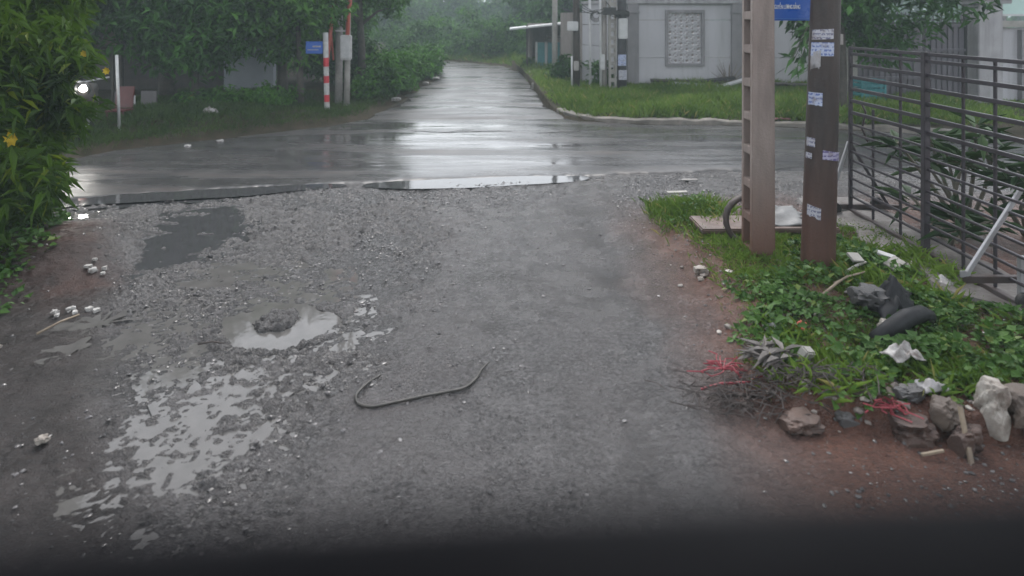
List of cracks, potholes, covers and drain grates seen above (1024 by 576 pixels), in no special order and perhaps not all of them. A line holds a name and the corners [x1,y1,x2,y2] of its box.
pothole [202,297,346,356]
